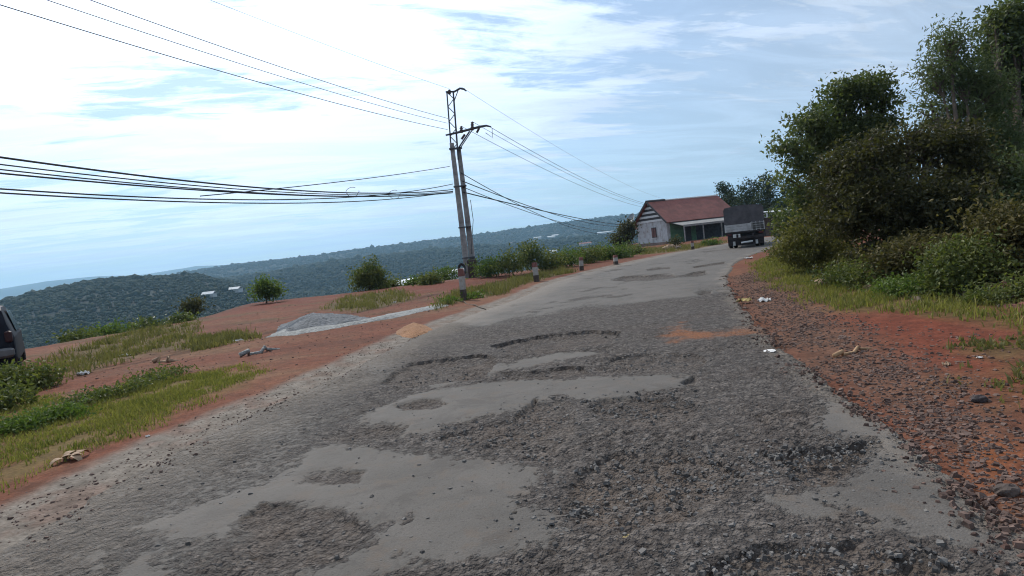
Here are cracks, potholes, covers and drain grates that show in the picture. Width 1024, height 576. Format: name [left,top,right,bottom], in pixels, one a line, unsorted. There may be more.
pothole [762,440,871,489]
pothole [284,462,370,492]
pothole [490,330,622,354]
pothole [379,354,500,389]
pothole [585,394,706,430]
pothole [608,272,680,282]
pothole [388,395,450,412]
pothole [538,444,755,532]
pothole [219,496,377,573]
pothole [497,366,591,380]
